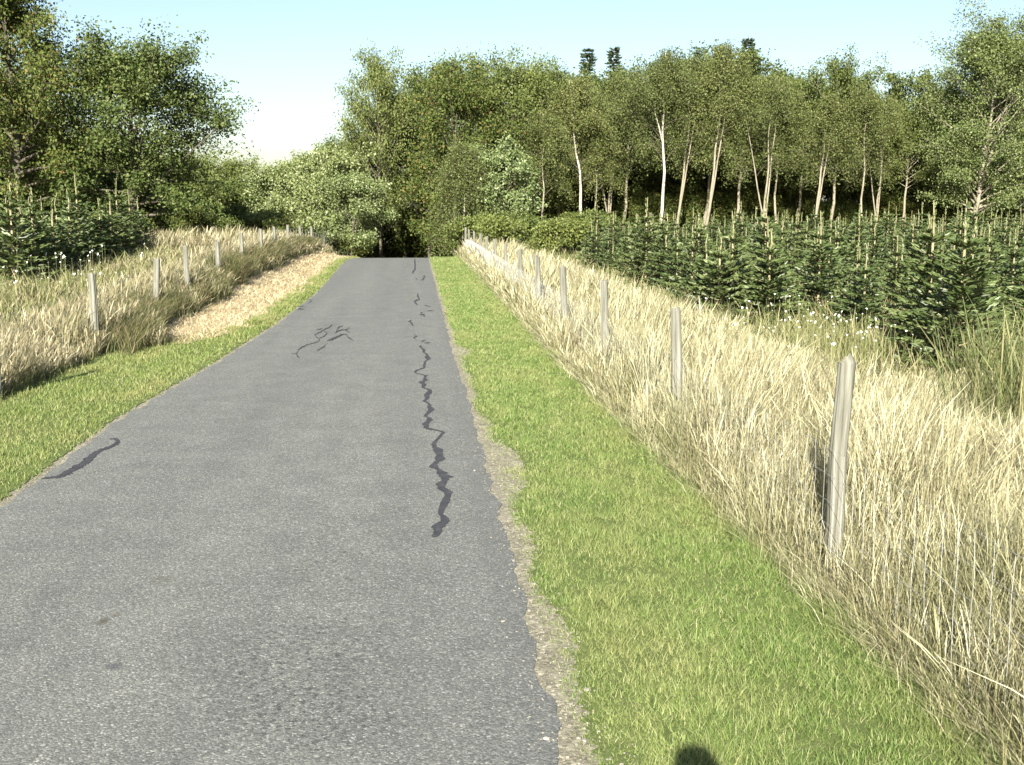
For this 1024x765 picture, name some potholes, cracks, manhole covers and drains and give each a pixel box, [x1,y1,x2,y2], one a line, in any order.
crack [408,259,454,537]
crack [292,324,352,358]
crack [41,438,120,479]
